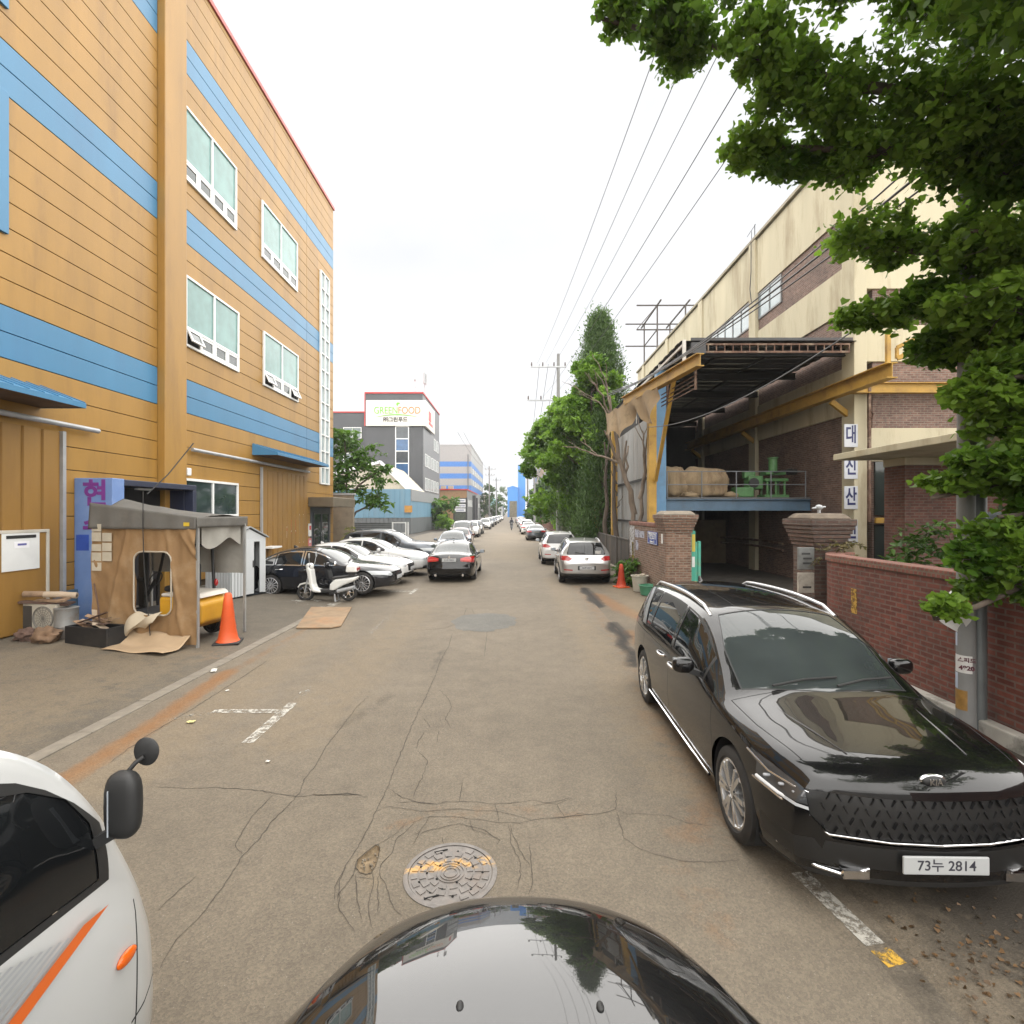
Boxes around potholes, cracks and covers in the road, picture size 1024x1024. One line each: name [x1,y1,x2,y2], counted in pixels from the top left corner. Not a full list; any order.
manhole cover [403,843,497,908]
crack [158,696,369,968]
crack [534,796,734,862]
crack [334,607,592,929]
